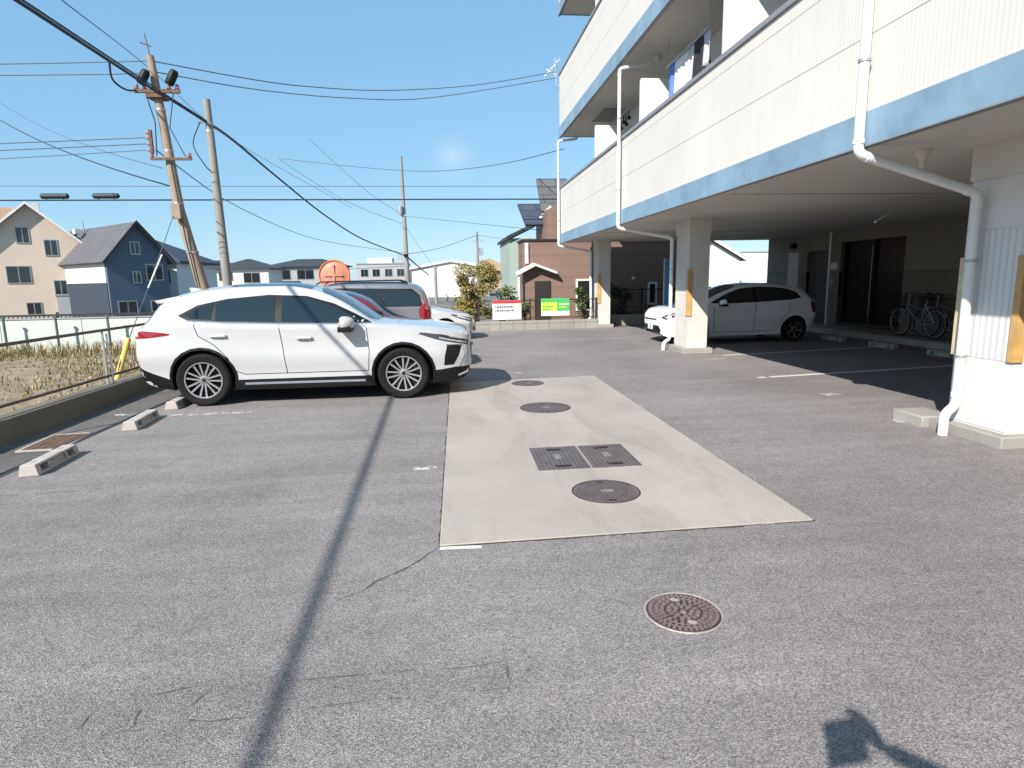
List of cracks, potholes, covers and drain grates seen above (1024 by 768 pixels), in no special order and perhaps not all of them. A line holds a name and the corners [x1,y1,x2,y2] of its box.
manhole cover [572,480,641,503]
crack [304,661,508,709]
drain grate [15,432,95,453]
crack [333,548,437,604]
manhole cover [520,402,571,413]
utility cover [528,443,643,472]
crack [78,687,250,728]
manhole cover [644,592,724,634]
